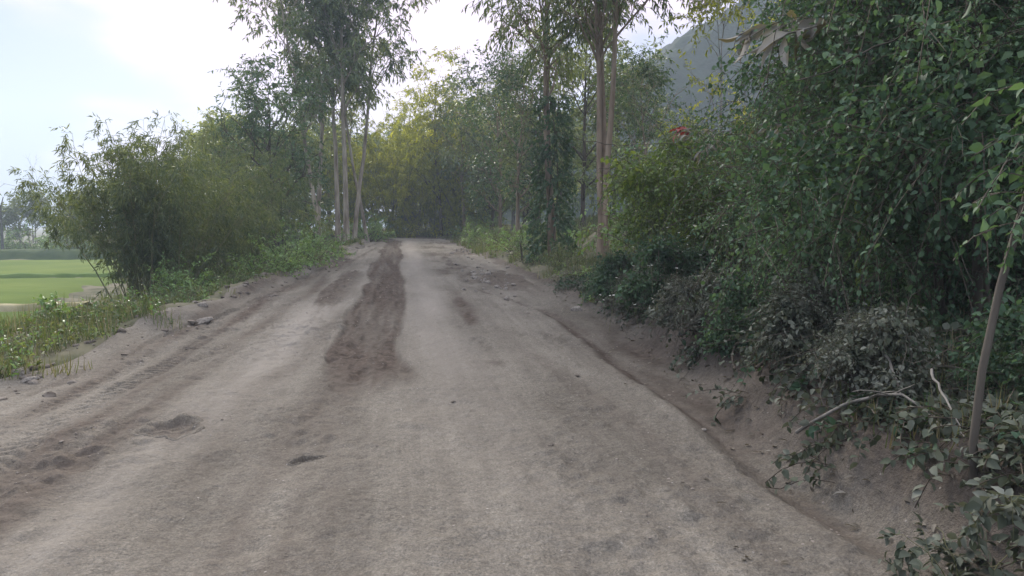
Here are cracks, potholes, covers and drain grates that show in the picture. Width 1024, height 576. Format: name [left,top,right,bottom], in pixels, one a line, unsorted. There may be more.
pothole [285,454,327,466]
pothole [130,413,205,441]
